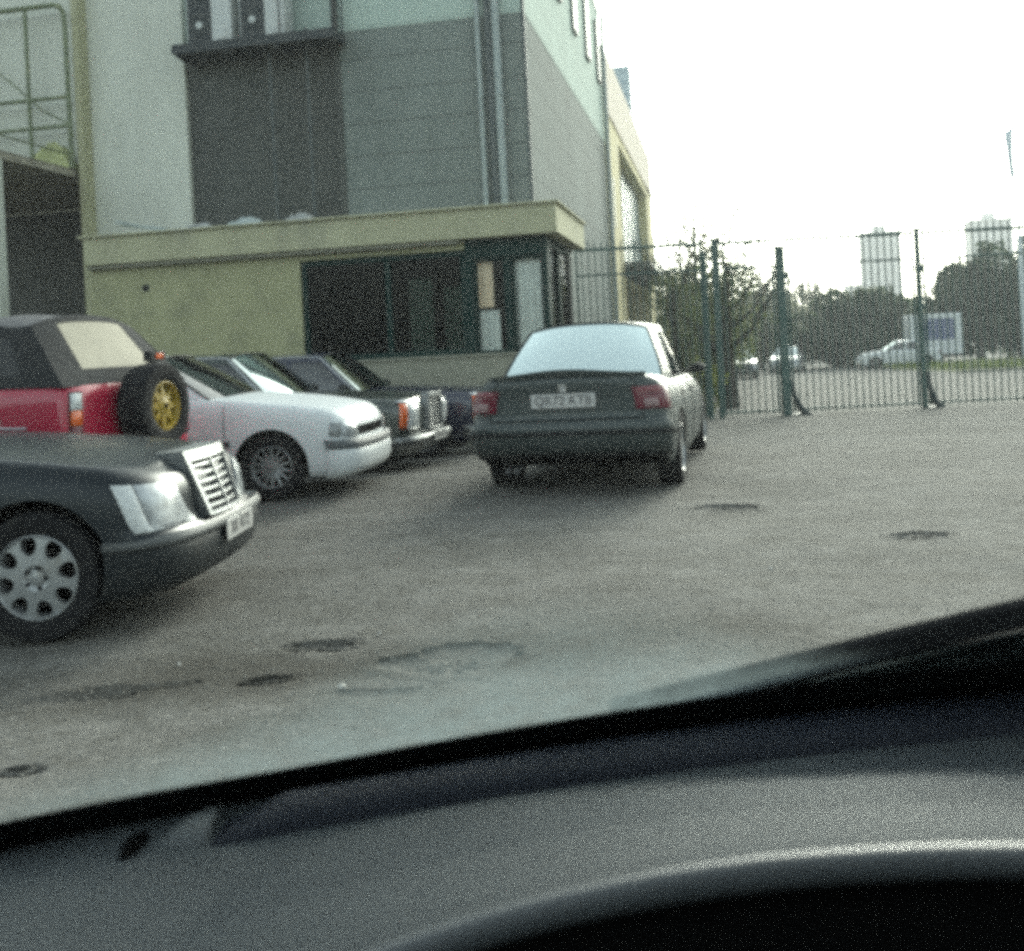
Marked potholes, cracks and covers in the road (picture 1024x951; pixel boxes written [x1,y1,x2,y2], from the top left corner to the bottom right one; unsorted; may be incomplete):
pothole [351,638,543,683]
pothole [240,674,298,686]
pothole [881,531,960,541]
pothole [0,764,38,778]
pothole [282,639,367,652]
pothole [687,504,767,512]
